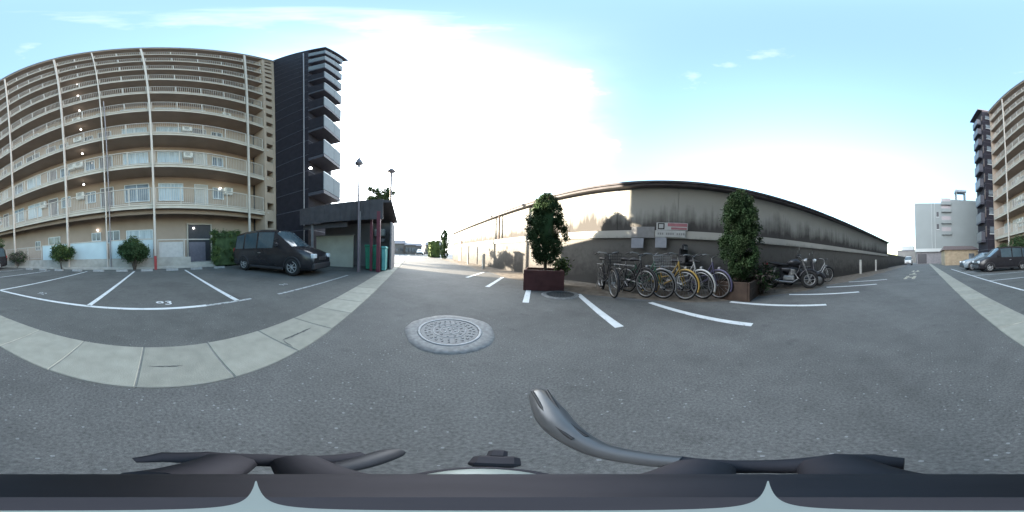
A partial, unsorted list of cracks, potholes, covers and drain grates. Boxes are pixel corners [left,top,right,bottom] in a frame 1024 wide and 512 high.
manhole cover [541,291,579,299]
manhole cover [405,315,494,354]
